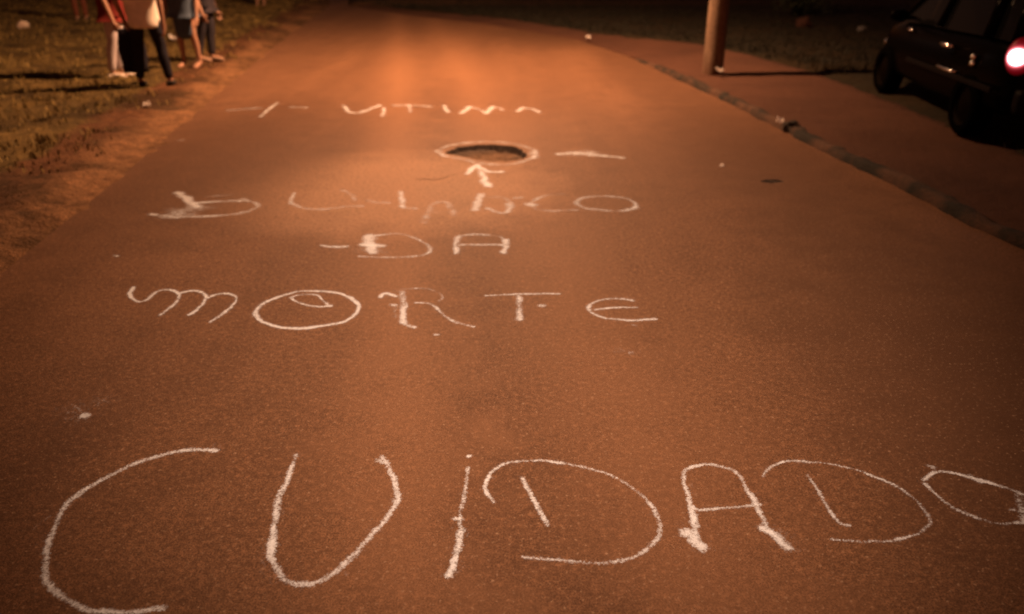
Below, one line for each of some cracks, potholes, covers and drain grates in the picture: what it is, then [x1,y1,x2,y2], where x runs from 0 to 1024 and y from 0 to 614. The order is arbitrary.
pothole [446,144,528,162]
